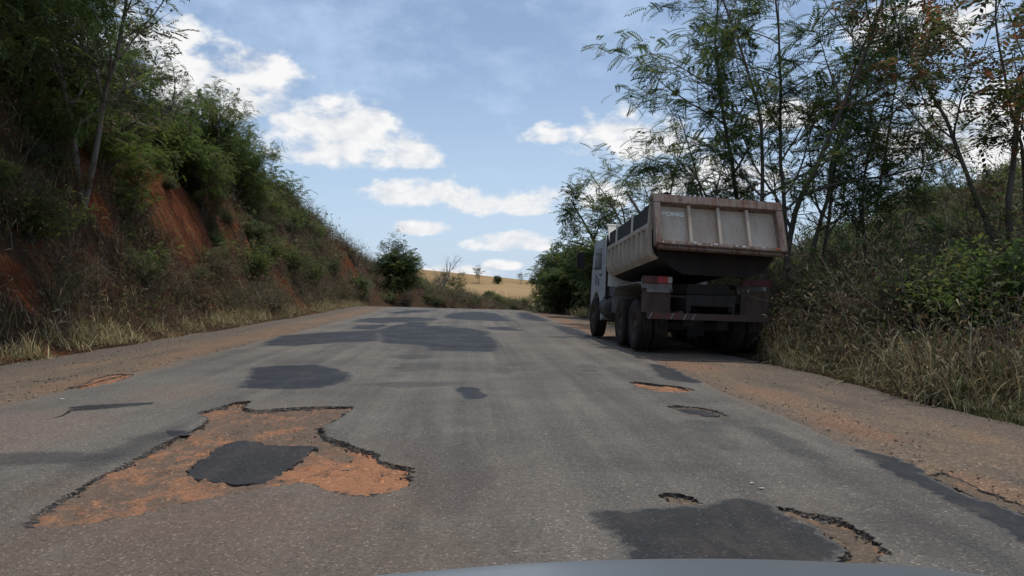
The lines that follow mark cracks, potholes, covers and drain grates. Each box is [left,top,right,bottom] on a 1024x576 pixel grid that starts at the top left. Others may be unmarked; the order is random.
pothole [628,381,695,392]
pothole [666,405,730,418]
pothole [777,506,893,564]
pothole [658,493,704,505]
pothole [68,374,133,390]
pothole [19,401,416,528]
